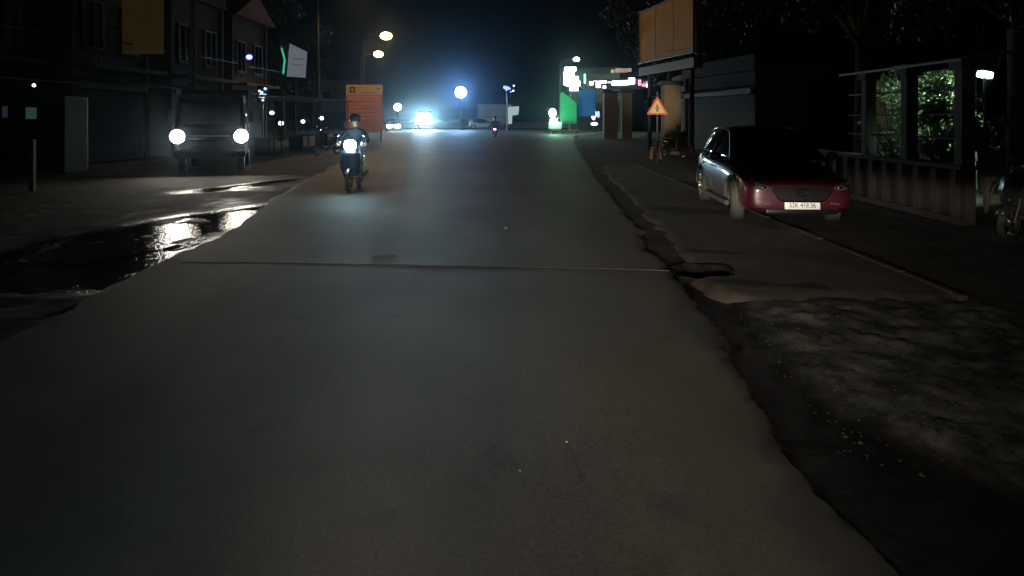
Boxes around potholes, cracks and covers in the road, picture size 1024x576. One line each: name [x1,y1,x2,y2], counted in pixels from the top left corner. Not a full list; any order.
pothole [668,263,734,284]
